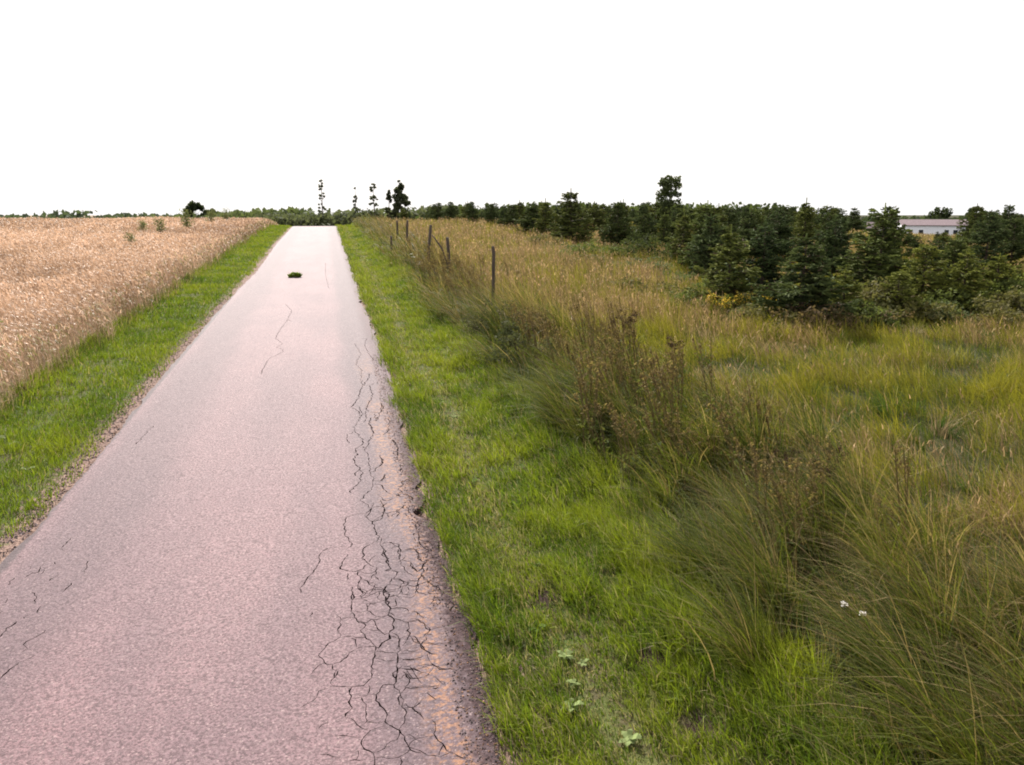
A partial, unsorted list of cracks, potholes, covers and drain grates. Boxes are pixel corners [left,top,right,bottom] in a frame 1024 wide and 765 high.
crack [300,338,471,765]
